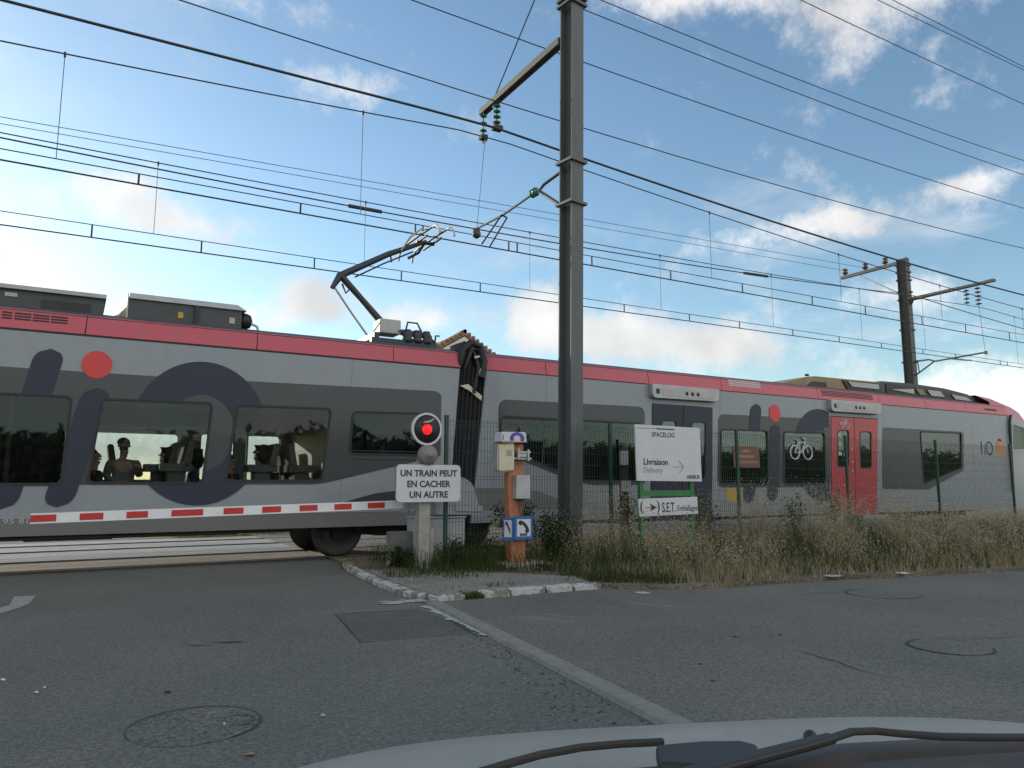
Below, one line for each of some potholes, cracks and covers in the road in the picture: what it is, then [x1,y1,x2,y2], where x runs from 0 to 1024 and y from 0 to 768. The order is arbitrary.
manhole cover [124,705,262,747]
manhole cover [845,588,923,599]
manhole cover [906,639,997,655]
